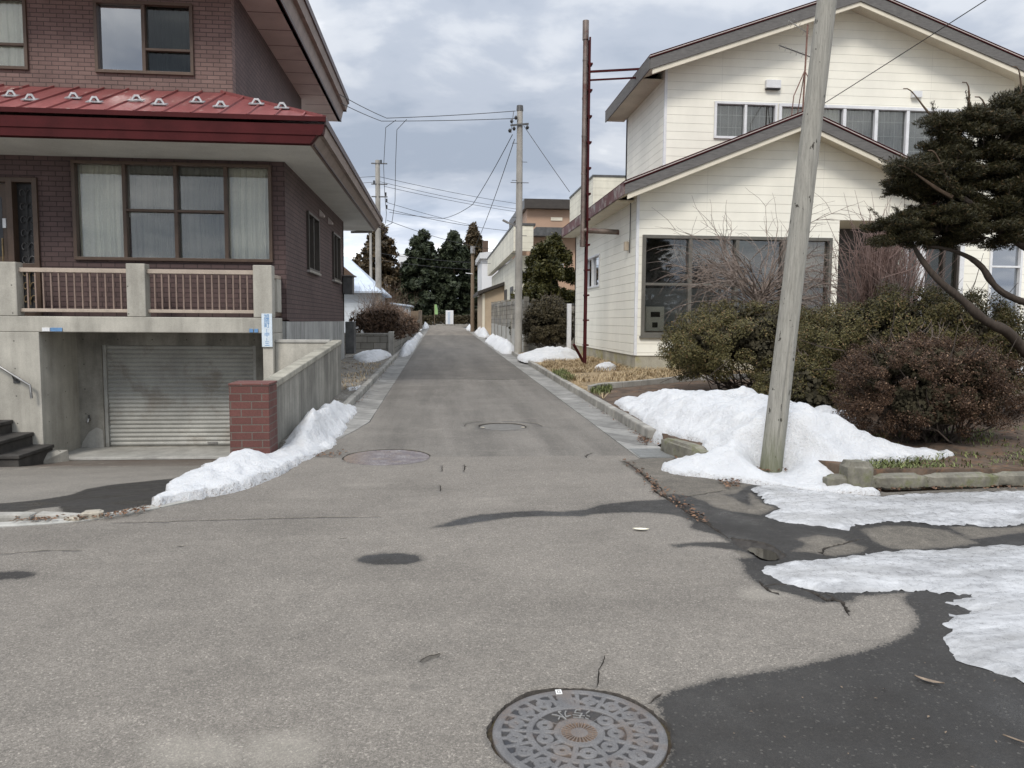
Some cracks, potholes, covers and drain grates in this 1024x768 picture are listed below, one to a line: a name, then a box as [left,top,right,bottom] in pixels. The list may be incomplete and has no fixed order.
crack [812,593,848,614]
manhole cover [487,689,672,768]
manhole cover [342,450,430,465]
